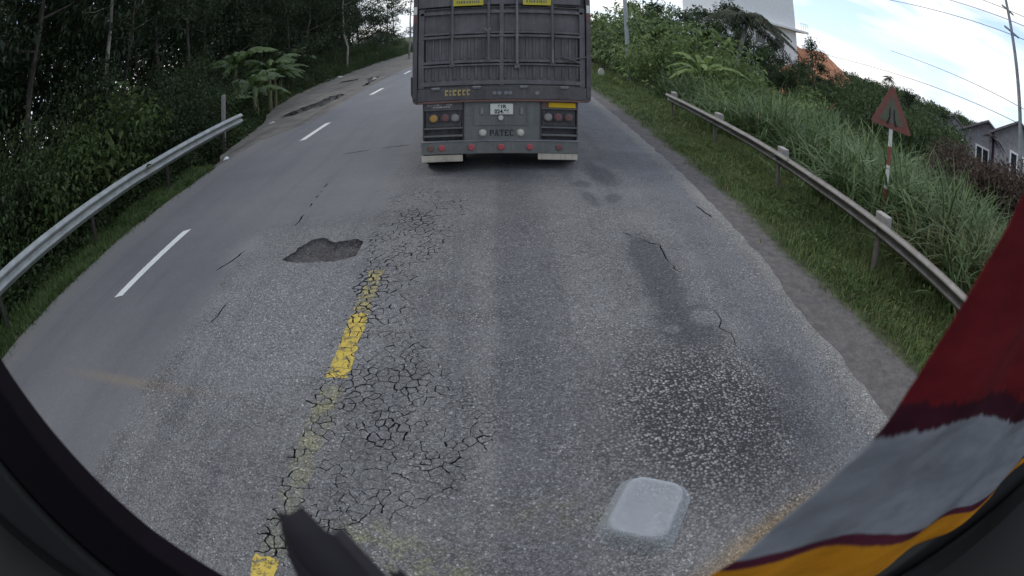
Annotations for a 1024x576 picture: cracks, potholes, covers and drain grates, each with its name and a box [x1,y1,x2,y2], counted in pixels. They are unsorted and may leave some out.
pothole [279,94,344,119]
crack [254,188,499,575]
pothole [282,238,363,263]
